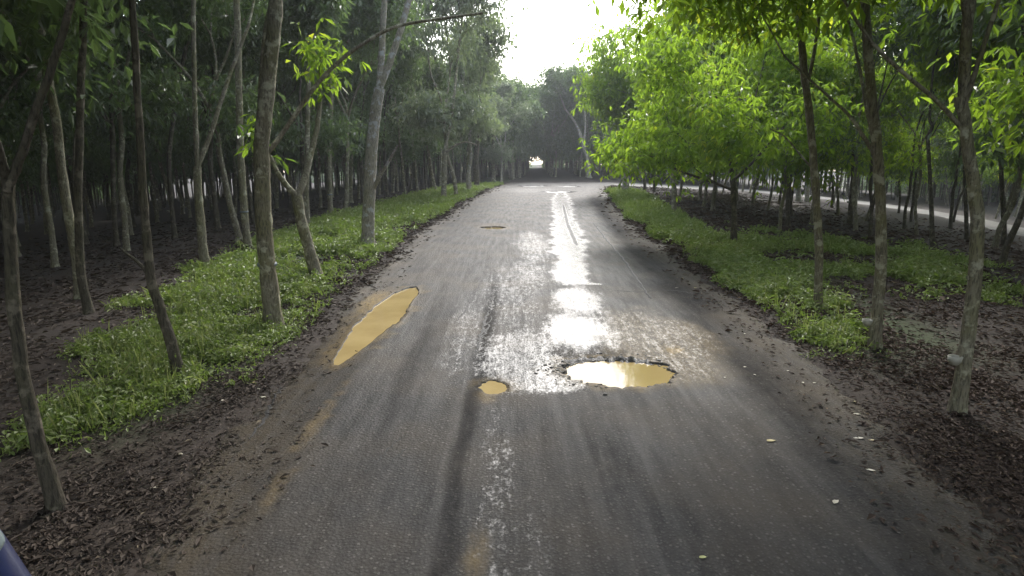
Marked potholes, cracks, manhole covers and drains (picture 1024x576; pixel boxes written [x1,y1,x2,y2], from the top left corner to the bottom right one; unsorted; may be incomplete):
crack [563,206,577,245]
pothole [466,376,519,399]
pothole [329,285,421,369]
pothole [531,352,690,395]
